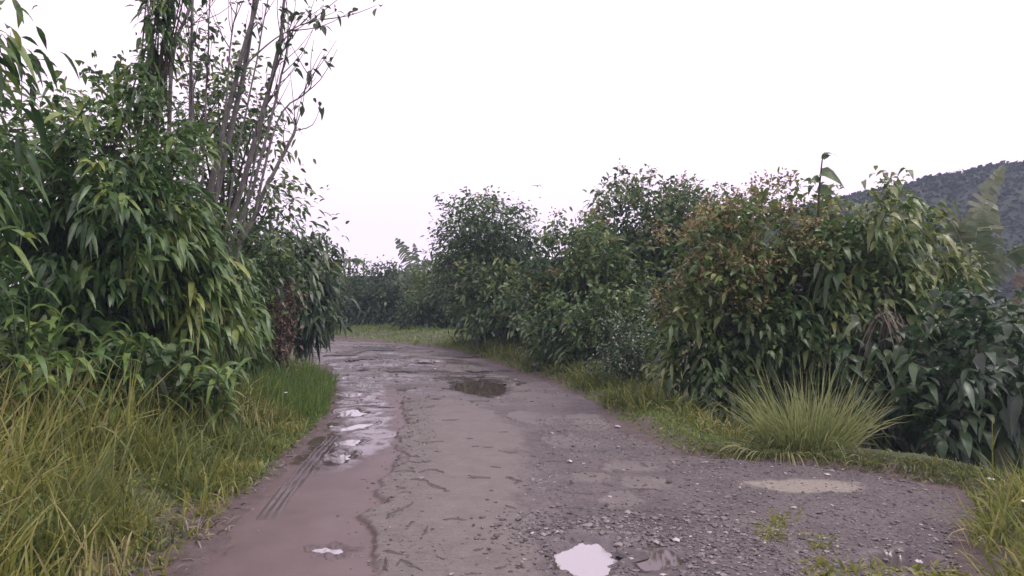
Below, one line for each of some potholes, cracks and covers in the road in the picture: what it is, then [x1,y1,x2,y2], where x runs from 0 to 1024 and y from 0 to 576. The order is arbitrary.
pothole [439,378,520,401]
crack [324,349,511,535]
crack [382,550,445,571]
pothole [532,524,650,576]
pothole [613,540,698,576]
pothole [303,541,366,562]
